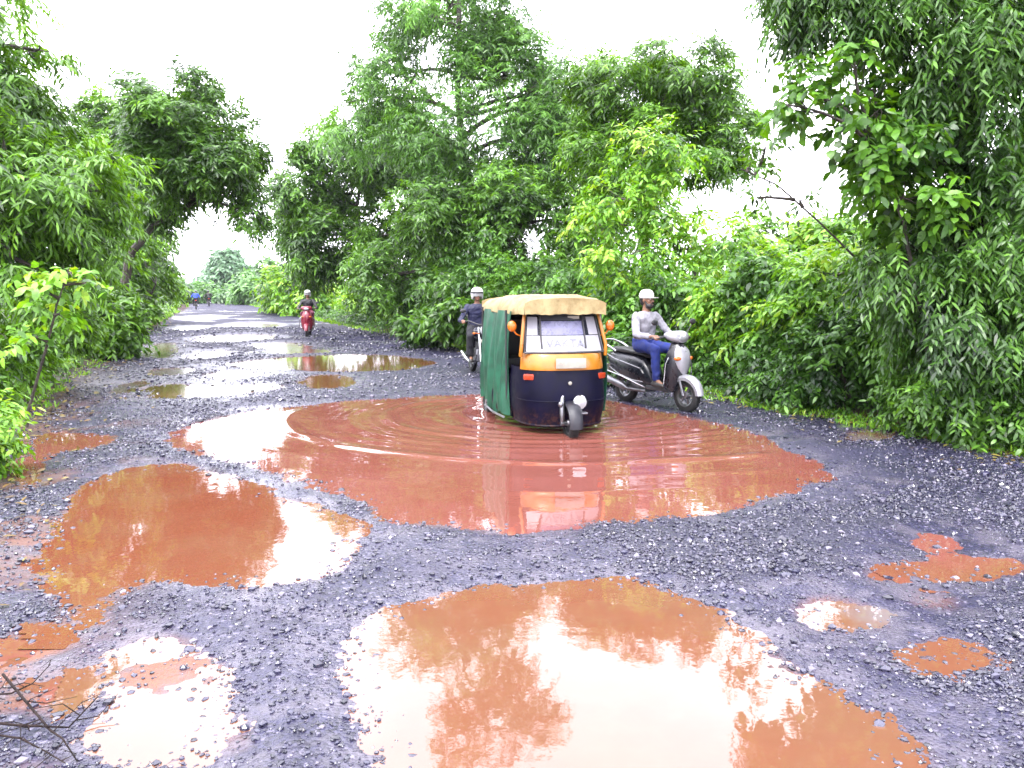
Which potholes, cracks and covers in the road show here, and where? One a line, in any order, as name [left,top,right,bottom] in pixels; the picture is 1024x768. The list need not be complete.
pothole [10,432,120,486]
pothole [164,394,838,535]
pothole [333,576,931,768]
pothole [225,354,436,372]
pothole [48,637,257,768]
pothole [298,374,356,388]
pothole [869,545,1024,593]
pothole [0,620,64,687]
pothole [127,383,286,399]
pothole [910,533,988,563]
pothole [17,463,385,649]
pothole [891,636,1011,683]
